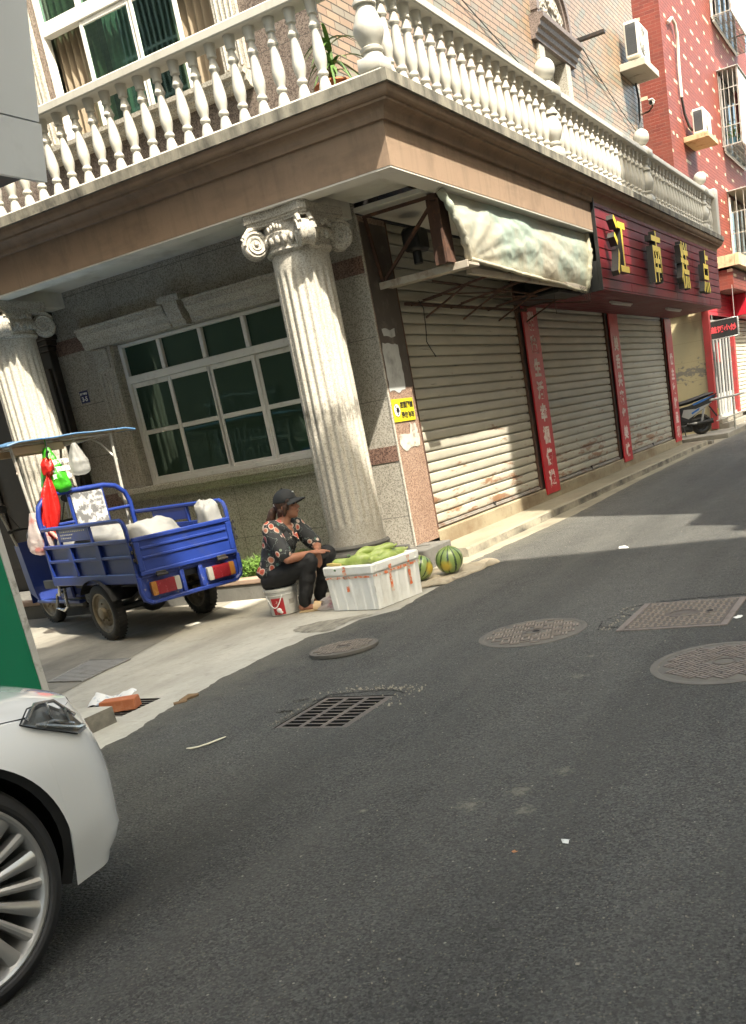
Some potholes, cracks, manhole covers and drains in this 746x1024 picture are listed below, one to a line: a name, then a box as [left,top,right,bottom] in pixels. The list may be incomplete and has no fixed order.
manhole cover [479,618,587,648]
manhole cover [650,641,746,685]
drain grate [275,695,394,728]
manhole cover [615,596,746,632]
manhole cover [309,638,378,659]
drain grate [87,698,160,716]
